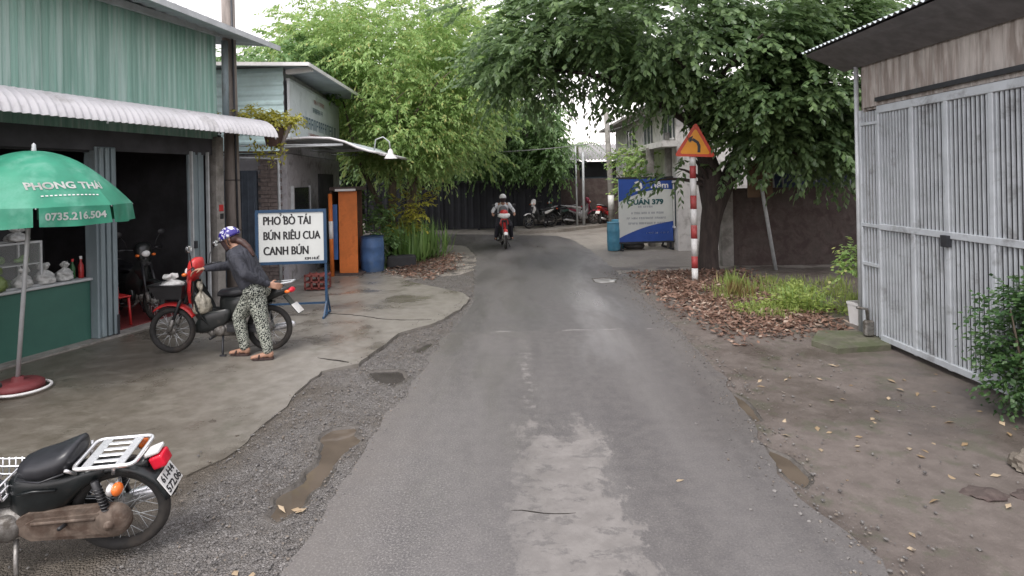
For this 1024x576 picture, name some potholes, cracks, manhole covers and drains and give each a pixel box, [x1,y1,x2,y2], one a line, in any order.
pothole [729,390,764,423]
pothole [765,447,815,490]
pothole [262,425,366,525]
pothole [364,369,411,387]
pothole [411,339,437,354]
